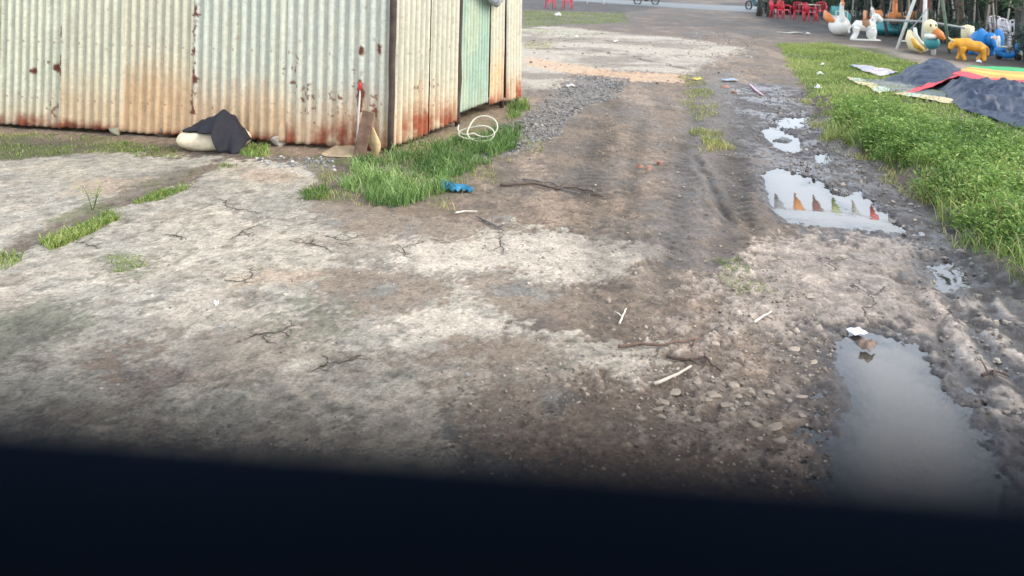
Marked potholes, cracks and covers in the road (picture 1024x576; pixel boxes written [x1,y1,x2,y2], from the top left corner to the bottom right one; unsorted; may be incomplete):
crack [290,234,359,253]
pothole [830,331,990,429]
pothole [770,114,811,131]
pothole [757,167,911,234]
pothole [757,123,808,155]
crack [213,197,266,240]
crack [238,320,293,343]
crack [222,267,259,283]
crack [313,354,372,371]
